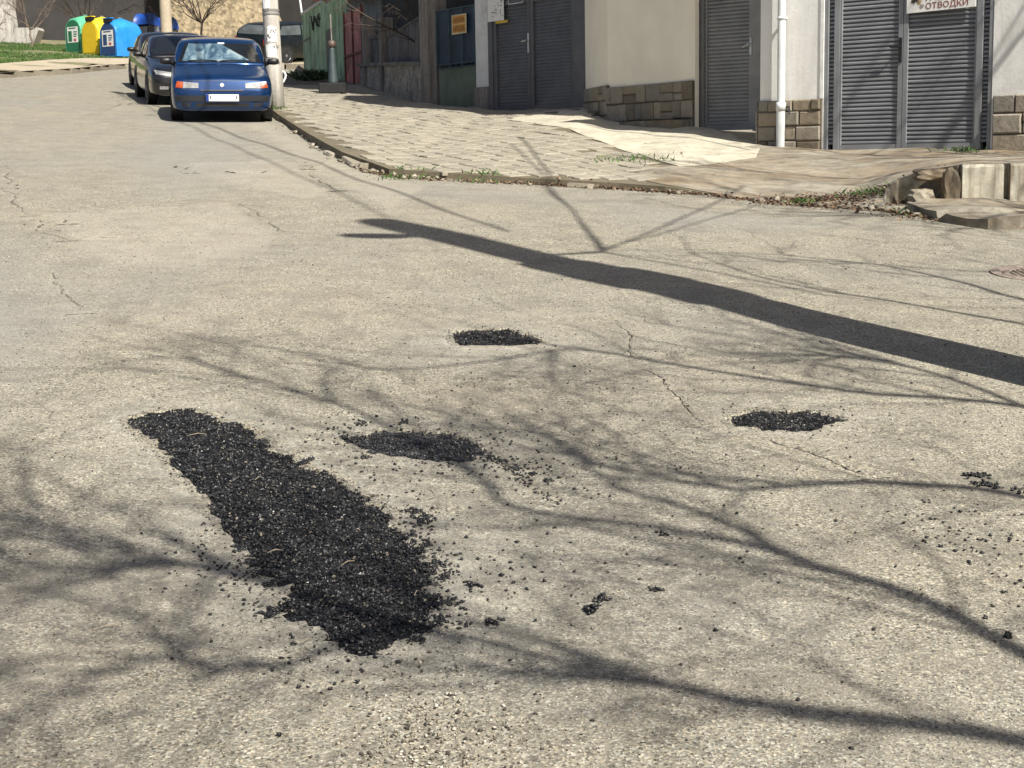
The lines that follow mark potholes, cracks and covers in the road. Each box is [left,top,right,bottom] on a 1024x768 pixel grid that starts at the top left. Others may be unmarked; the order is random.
crack [593,316,891,482]
crack [36,269,101,315]
manhole cover [990,265,1024,280]
